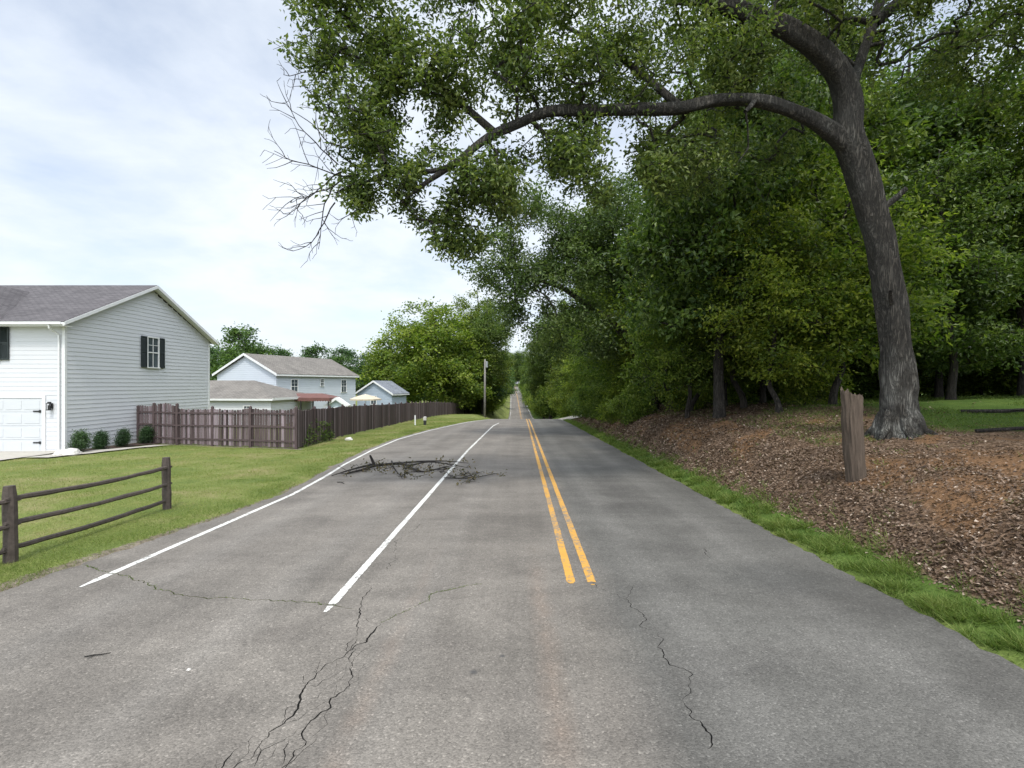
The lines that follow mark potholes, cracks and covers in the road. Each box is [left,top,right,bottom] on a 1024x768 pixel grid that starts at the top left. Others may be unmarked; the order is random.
crack [593,583,713,748]
crack [216,584,476,768]
crack [86,564,349,609]
